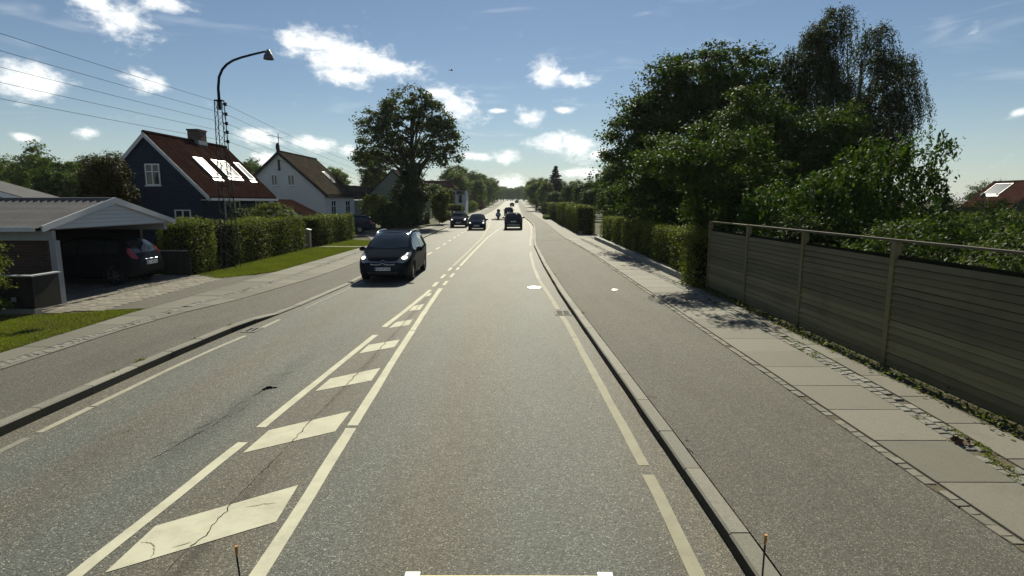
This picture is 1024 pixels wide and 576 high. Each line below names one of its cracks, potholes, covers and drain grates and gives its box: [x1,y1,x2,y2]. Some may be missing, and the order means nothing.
crack [154,390,264,458]
